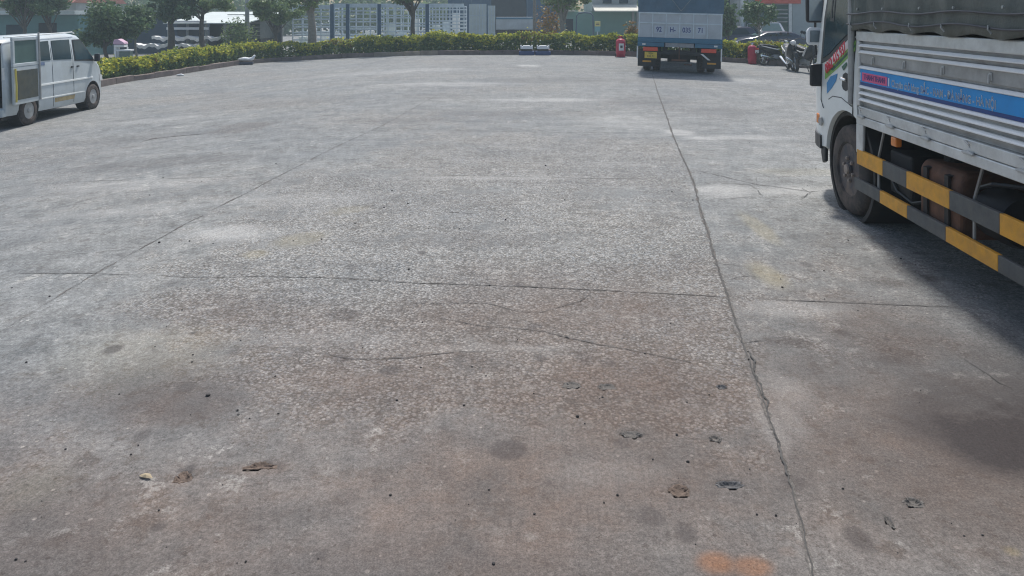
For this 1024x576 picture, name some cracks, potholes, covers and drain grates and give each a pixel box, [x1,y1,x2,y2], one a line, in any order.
crack [701,171,823,199]
pothole [715,481,745,489]
pothole [242,461,278,470]
pothole [902,497,925,508]
crack [323,351,472,359]
pothole [668,484,690,498]
crack [382,274,747,366]
pothole [619,431,645,439]
pothole [172,471,192,484]
